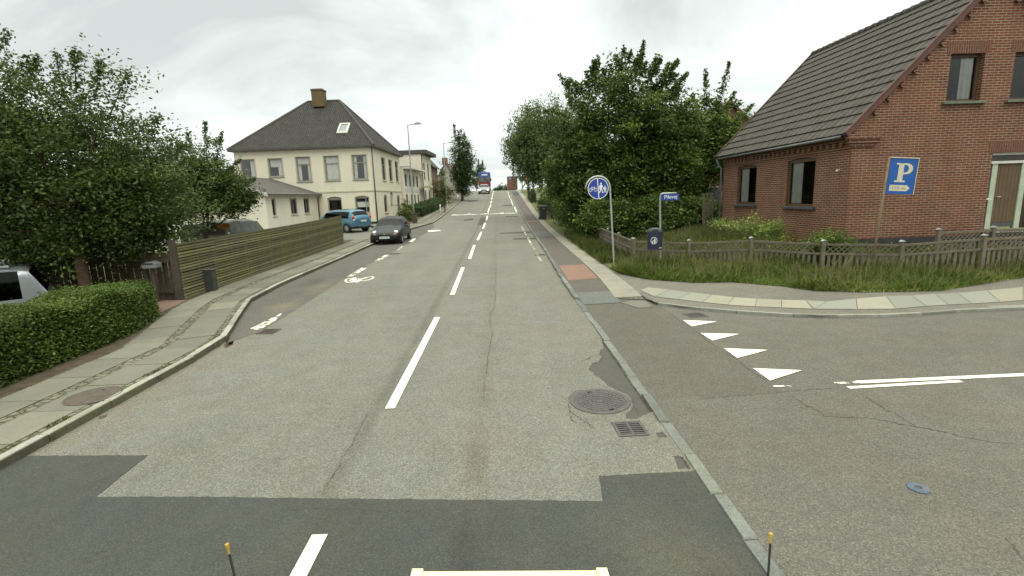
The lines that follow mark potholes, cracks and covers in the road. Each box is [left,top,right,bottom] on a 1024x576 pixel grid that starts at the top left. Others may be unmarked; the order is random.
crack [794,397,1015,444]
crack [286,412,401,511]
manhole cover [570,389,631,414]
drain grate [611,420,650,437]
manhole cover [62,386,124,406]
utility cover [906,482,931,494]
crack [483,264,497,402]
